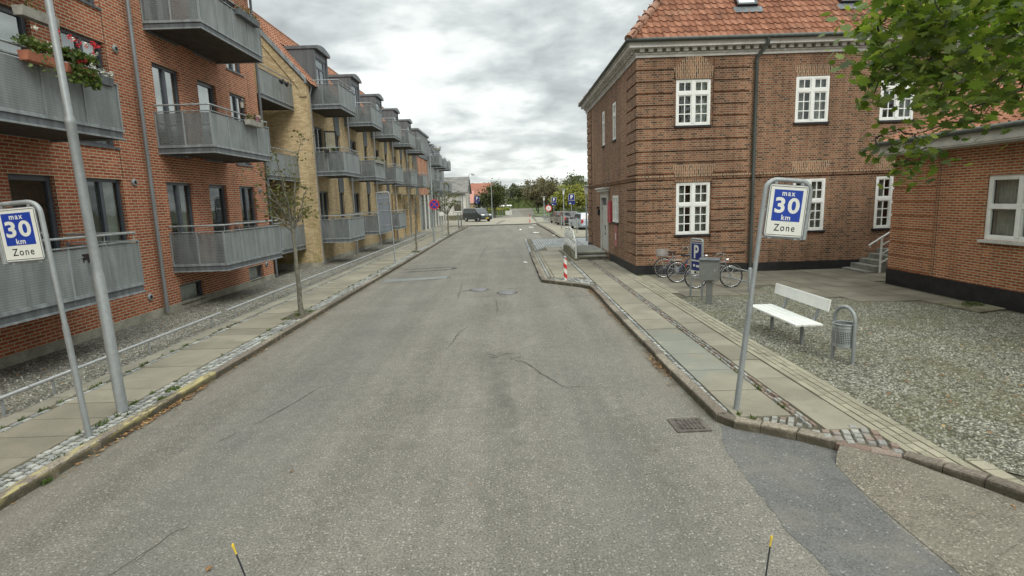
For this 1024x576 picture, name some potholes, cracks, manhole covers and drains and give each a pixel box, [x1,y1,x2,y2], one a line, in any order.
crack [488,353,575,388]
drain grate [667,417,712,433]
